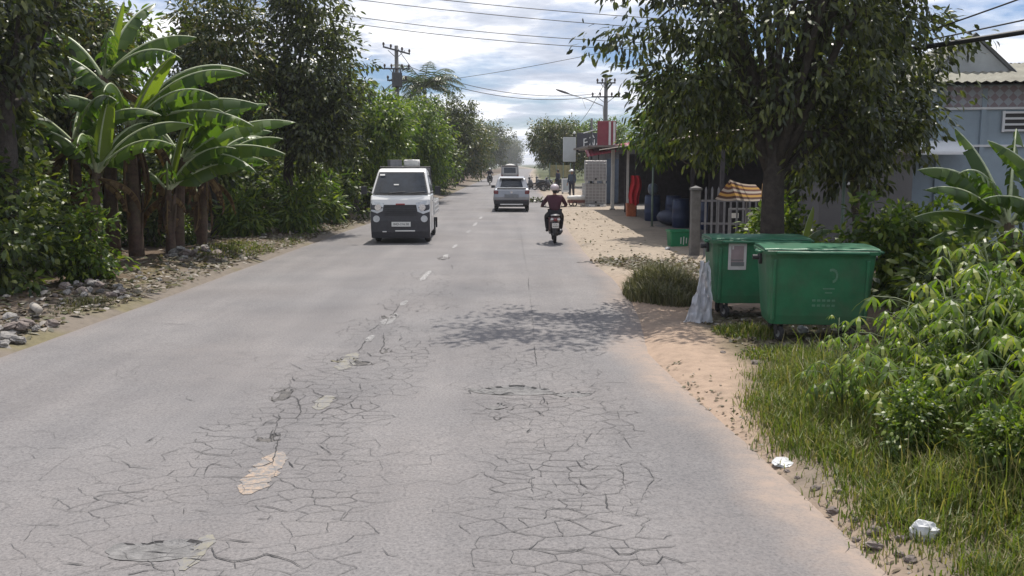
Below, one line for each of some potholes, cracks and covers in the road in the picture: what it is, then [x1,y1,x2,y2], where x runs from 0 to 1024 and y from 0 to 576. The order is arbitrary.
pothole [105,539,202,561]
pothole [271,387,294,401]
crack [0,237,699,576]
pothole [469,385,555,395]
